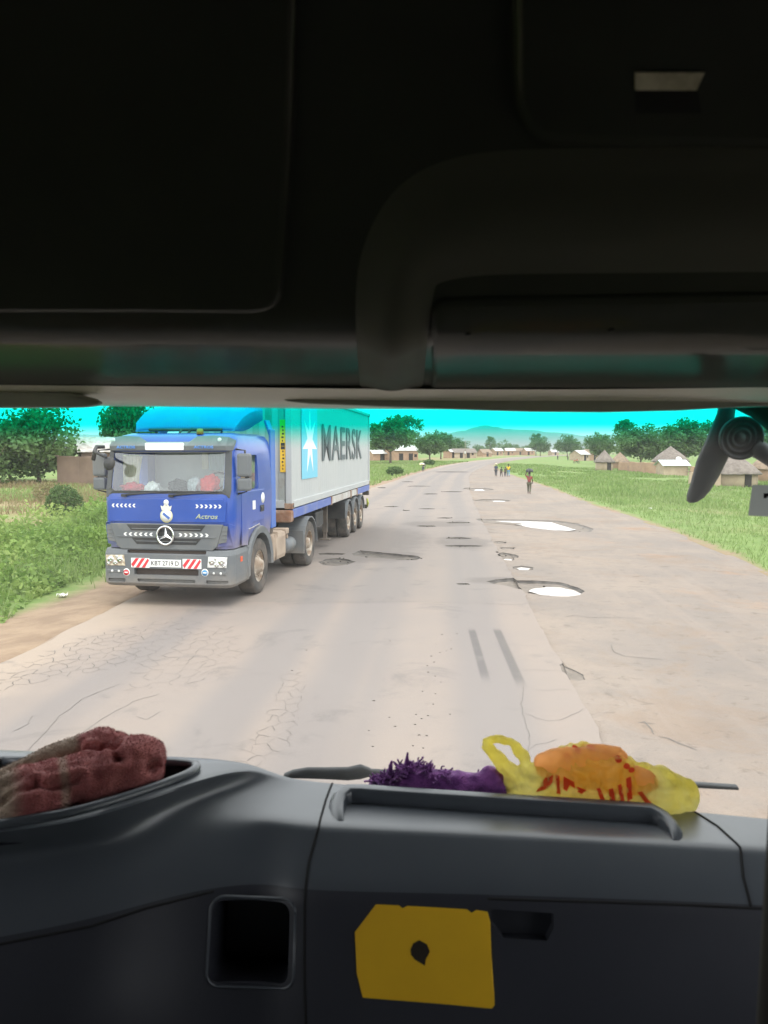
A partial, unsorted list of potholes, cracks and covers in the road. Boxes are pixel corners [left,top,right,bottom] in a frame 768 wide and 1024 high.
crack [520,669,581,752]
pothole [477,519,593,532]
pothole [487,578,585,596]
pothole [496,552,519,560]
pothole [319,557,355,566]
crack [2,617,242,751]
pothole [352,550,422,560]
pothole [560,664,585,681]
